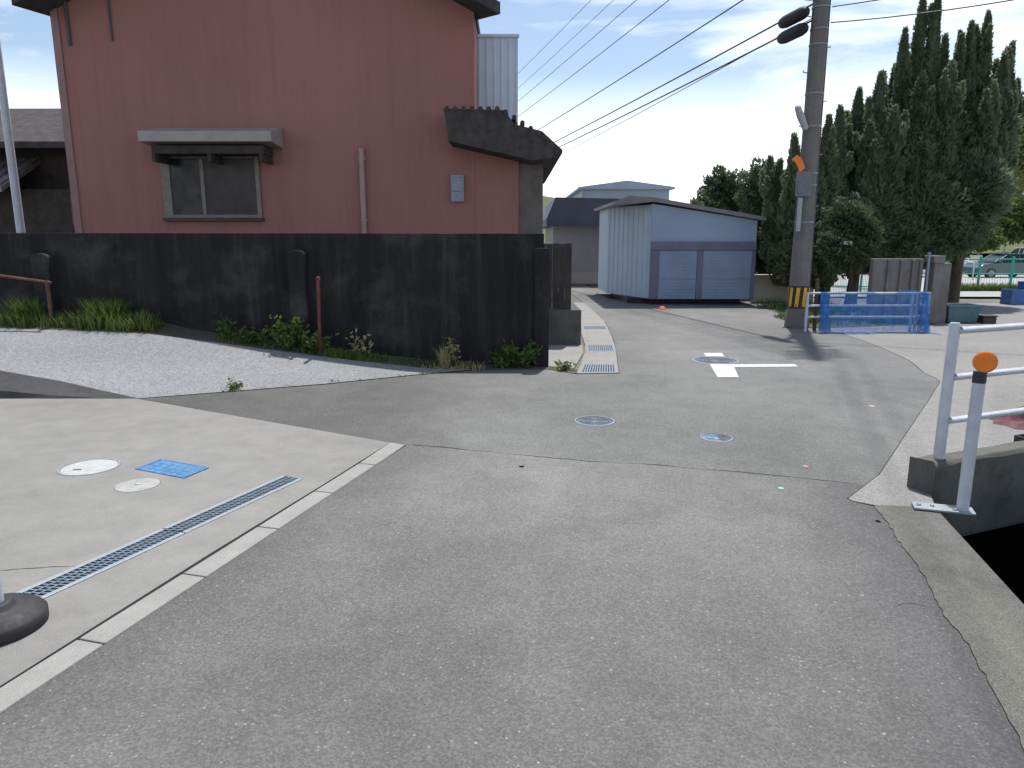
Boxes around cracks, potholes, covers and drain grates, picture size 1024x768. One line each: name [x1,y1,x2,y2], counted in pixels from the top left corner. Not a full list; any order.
manhole cover [574,416,615,426]
utility cover [57,458,121,476]
drain grate [15,528,185,599]
drain grate [163,476,302,534]
manhole cover [700,433,733,442]
utility cover [114,478,160,492]
